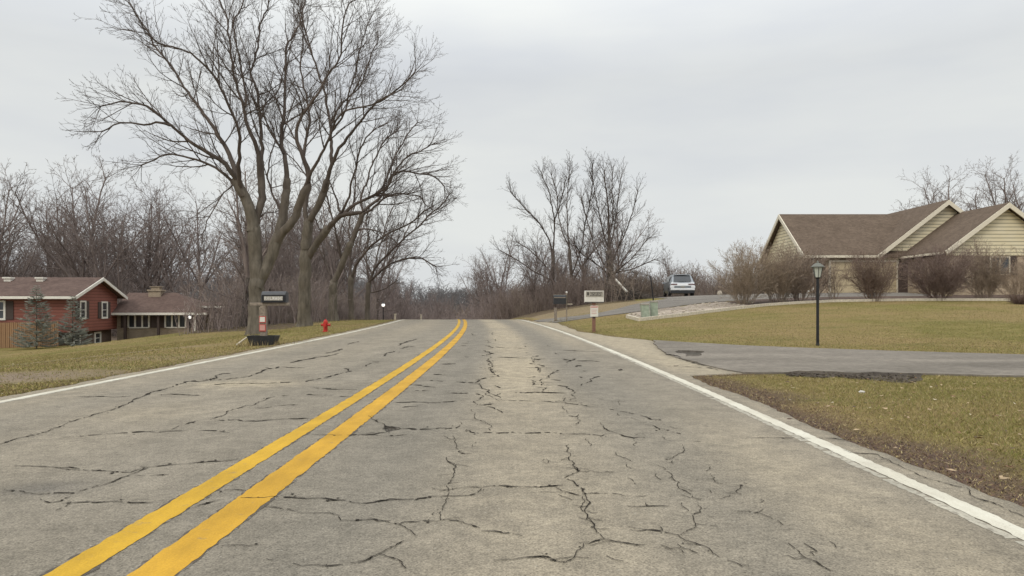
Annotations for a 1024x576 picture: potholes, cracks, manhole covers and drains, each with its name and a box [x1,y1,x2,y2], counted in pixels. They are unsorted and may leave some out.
crack [4,332,783,568]
crack [785,533,836,571]
